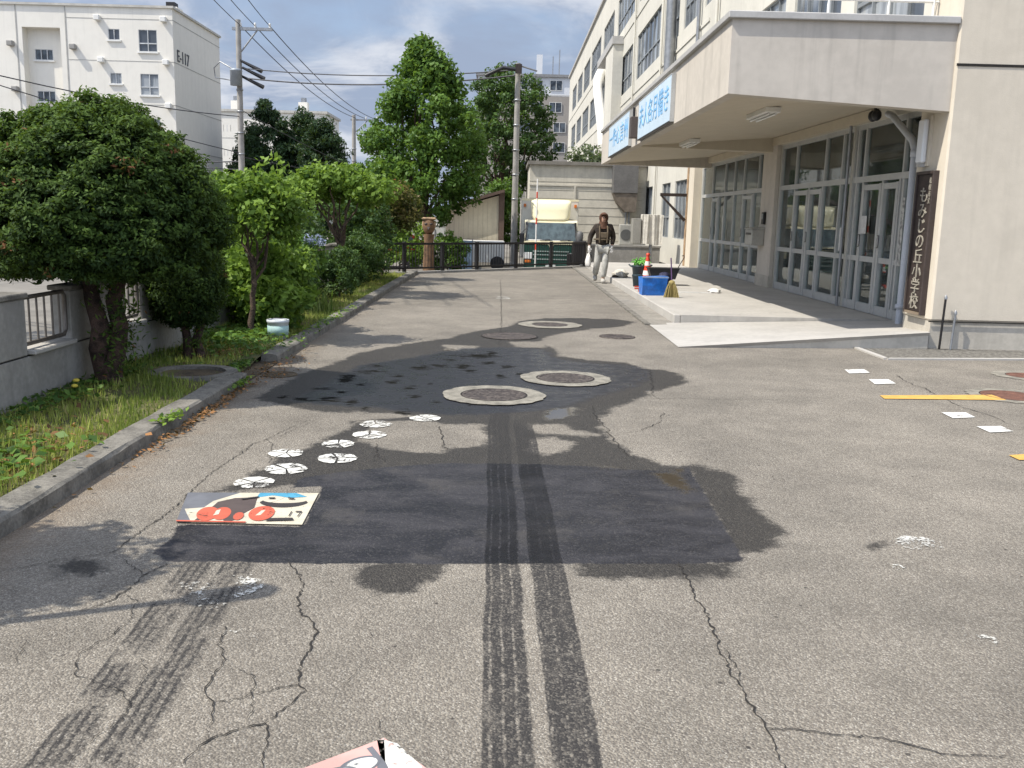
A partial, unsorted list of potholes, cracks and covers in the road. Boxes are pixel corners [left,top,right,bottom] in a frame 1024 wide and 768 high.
manhole cover [148,364,238,382]
crack [1,422,309,765]
crack [592,370,665,457]
manhole cover [964,388,1024,403]
manhole cover [443,385,546,405]
manhole cover [990,371,1024,380]
manhole cover [520,371,611,386]
manhole cover [481,332,538,340]
crack [678,561,1018,768]
